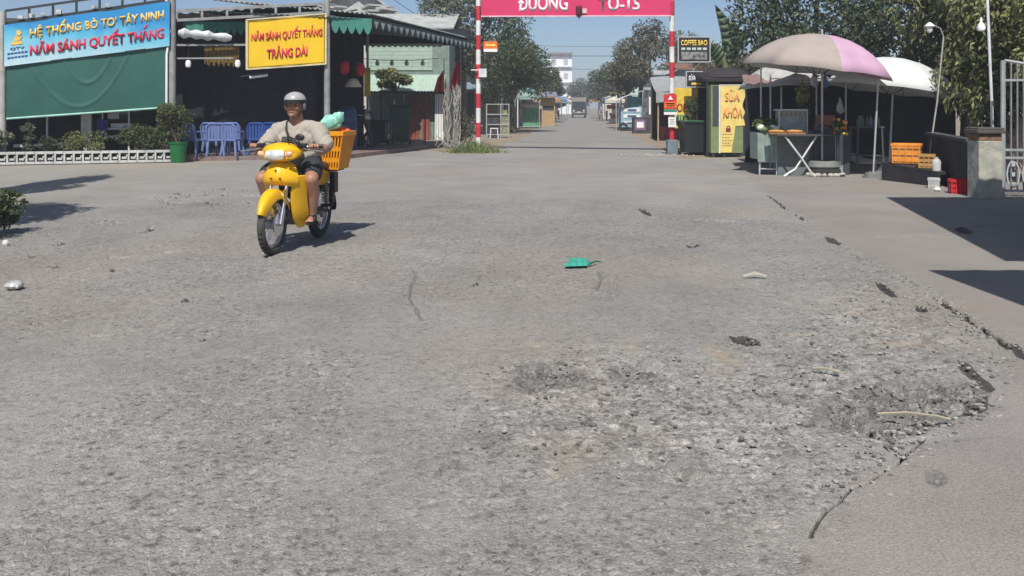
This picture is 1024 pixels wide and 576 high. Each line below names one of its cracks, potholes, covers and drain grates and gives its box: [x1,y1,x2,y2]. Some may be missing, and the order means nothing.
crack [941,303,1011,350]
crack [810,440,925,539]
pothole [729,336,761,346]
pothole [806,377,992,441]
pothole [957,360,995,393]
crack [409,269,421,319]
pothole [513,361,597,395]
crack [767,196,808,221]
pothole [875,282,898,298]
